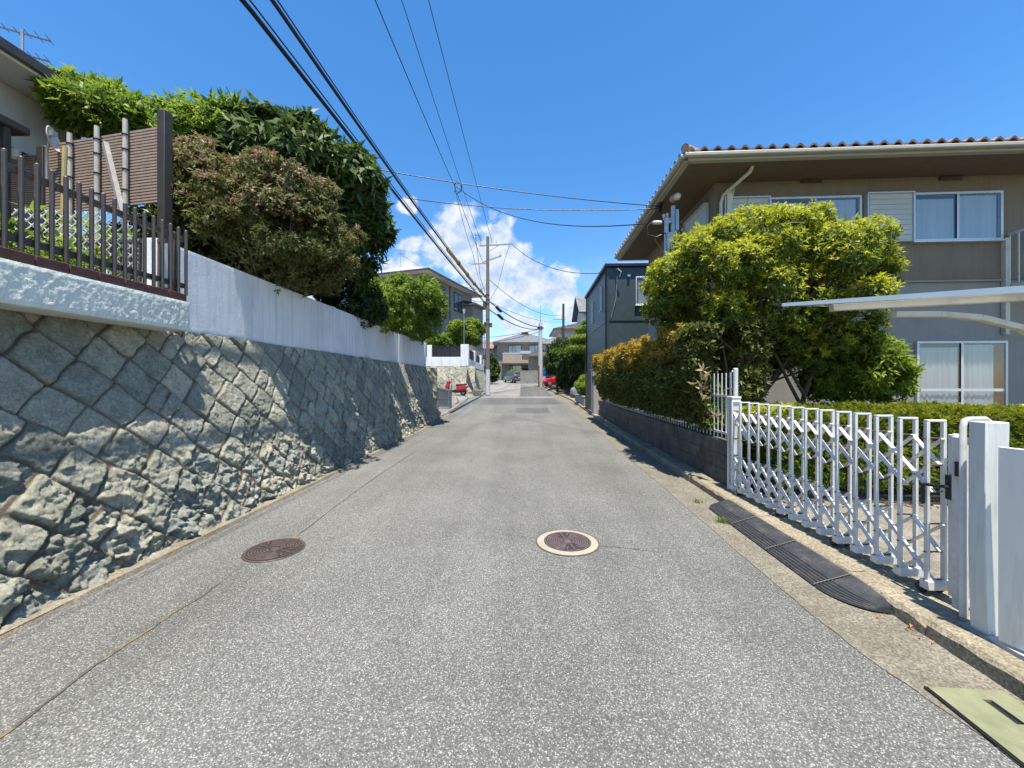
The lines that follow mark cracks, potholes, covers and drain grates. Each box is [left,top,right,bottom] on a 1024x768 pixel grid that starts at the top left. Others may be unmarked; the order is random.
manhole cover [536,529,600,556]
manhole cover [241,536,306,562]
